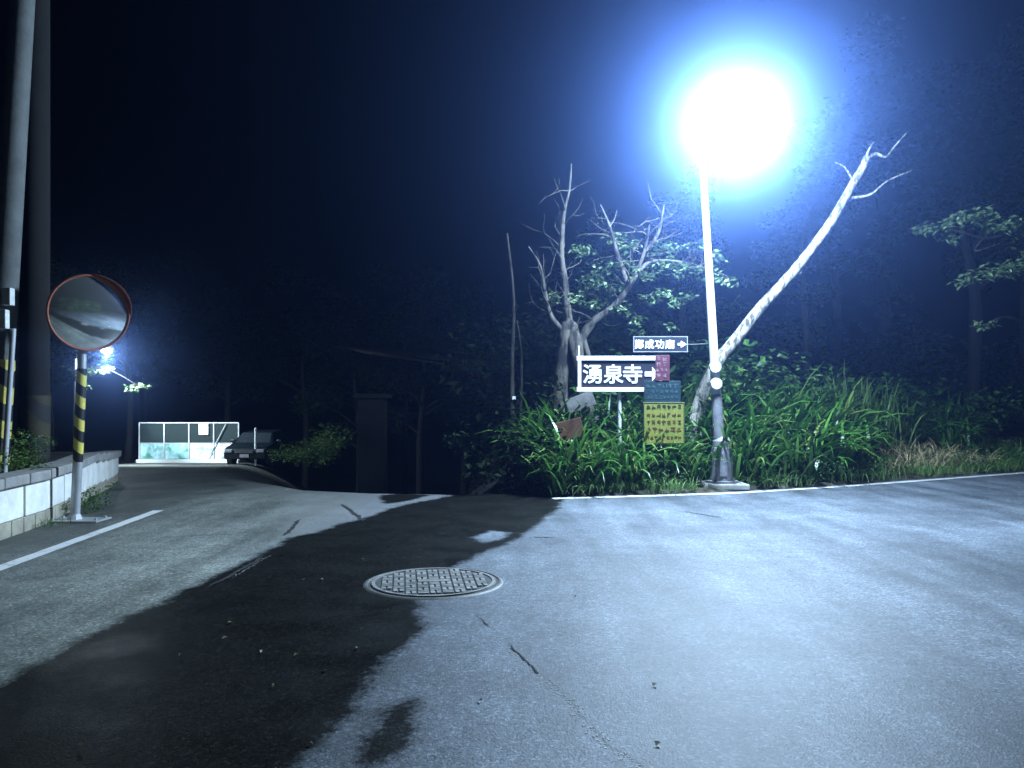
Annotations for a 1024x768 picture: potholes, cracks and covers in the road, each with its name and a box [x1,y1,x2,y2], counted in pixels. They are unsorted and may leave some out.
crack [479,617,653,768]
manhole cover [363,567,504,600]
crack [282,519,300,536]
crack [342,504,363,521]
